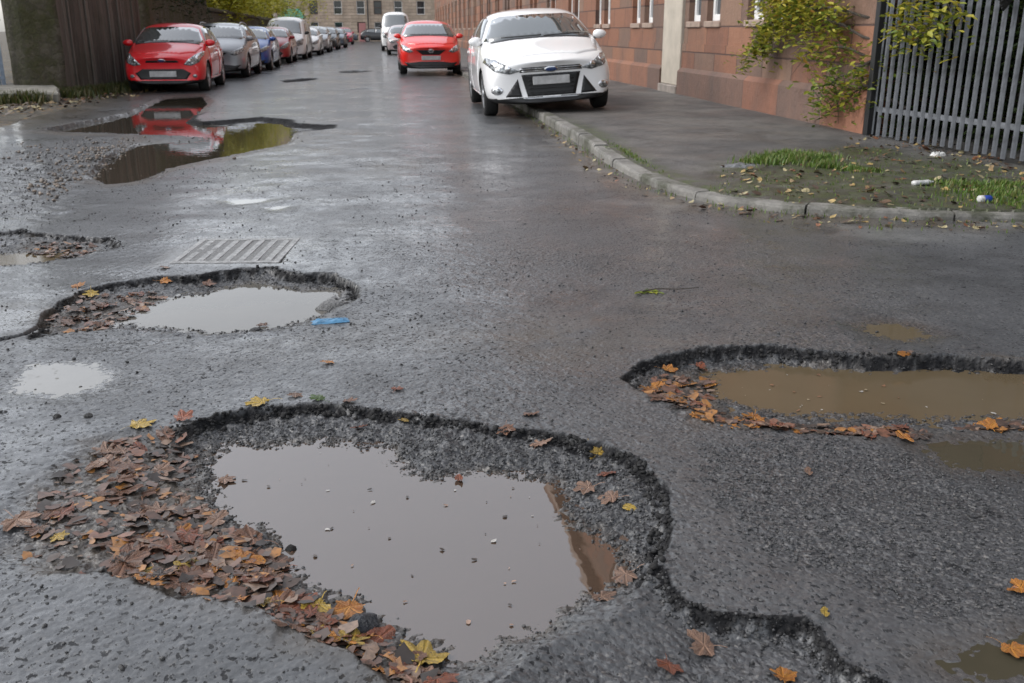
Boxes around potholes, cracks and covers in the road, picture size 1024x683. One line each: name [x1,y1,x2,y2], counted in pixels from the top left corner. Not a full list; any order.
pothole [0,399,691,683]
pothole [22,93,341,190]
pothole [0,227,132,268]
pothole [16,264,367,343]
pothole [612,341,1024,445]
